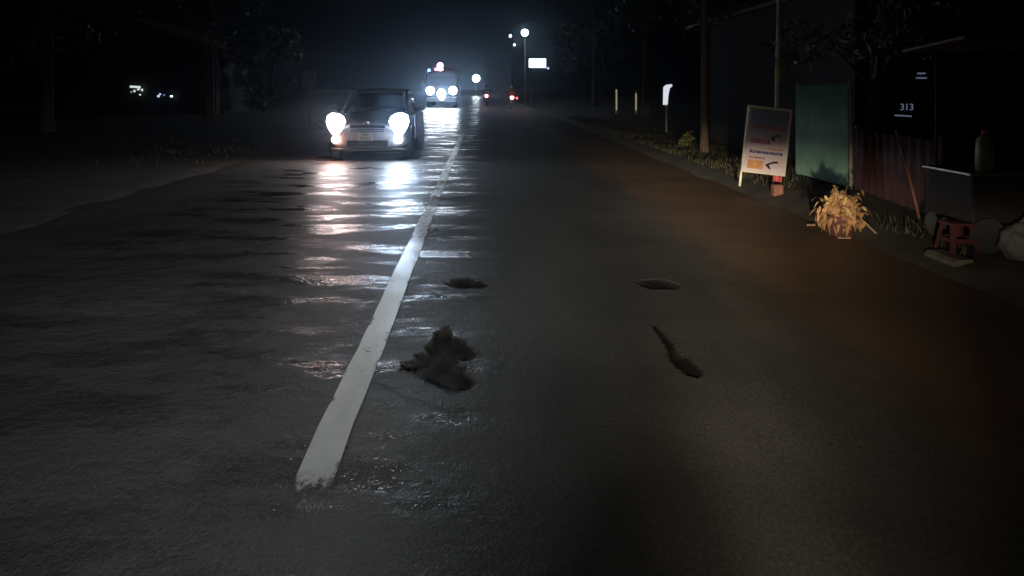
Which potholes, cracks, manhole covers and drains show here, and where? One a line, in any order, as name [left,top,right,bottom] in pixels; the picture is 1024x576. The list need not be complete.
pothole [371,318,517,411]
